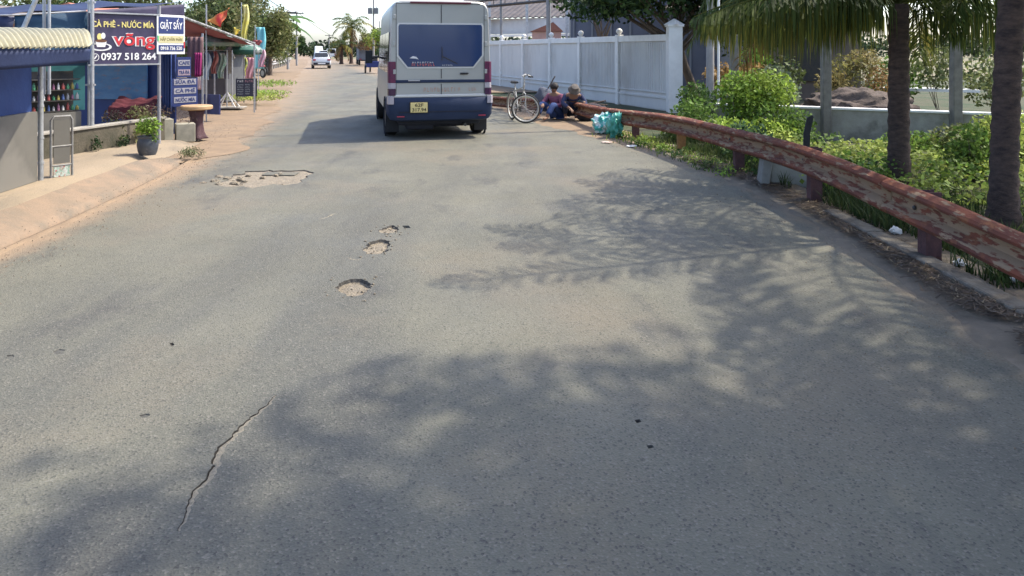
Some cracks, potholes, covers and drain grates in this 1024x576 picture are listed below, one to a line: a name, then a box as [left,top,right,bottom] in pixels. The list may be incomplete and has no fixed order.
pothole [199,170,314,188]
crack [178,395,277,531]
pothole [359,234,397,258]
pothole [370,224,409,237]
pothole [325,276,377,301]
